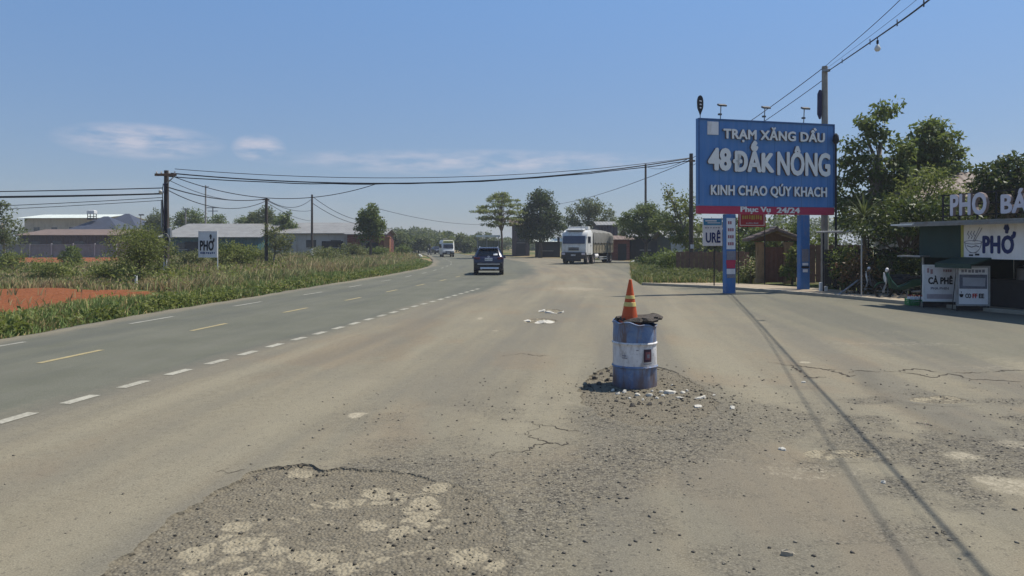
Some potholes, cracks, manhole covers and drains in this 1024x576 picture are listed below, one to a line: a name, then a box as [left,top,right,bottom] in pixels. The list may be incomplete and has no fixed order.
crack [768,362,1021,382]
crack [479,423,576,455]
pothole [567,364,730,430]
pothole [80,460,541,576]
